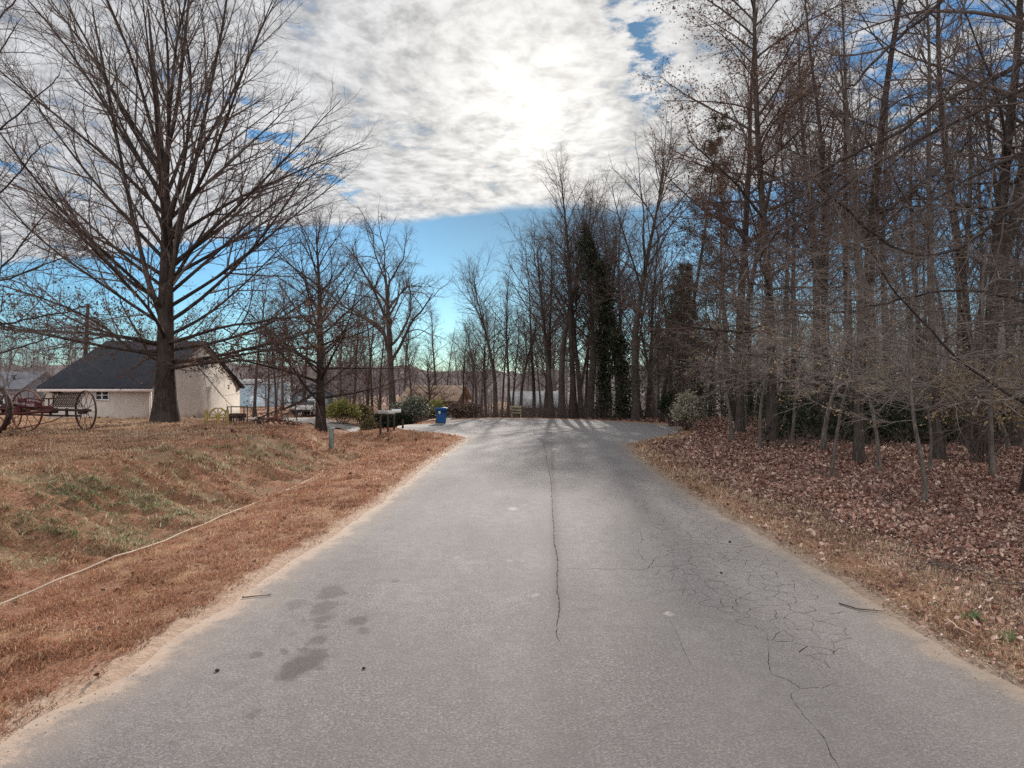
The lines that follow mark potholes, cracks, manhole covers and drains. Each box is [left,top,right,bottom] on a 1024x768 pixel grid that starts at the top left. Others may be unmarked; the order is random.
crack [635,482,851,767]
crack [535,434,561,645]
